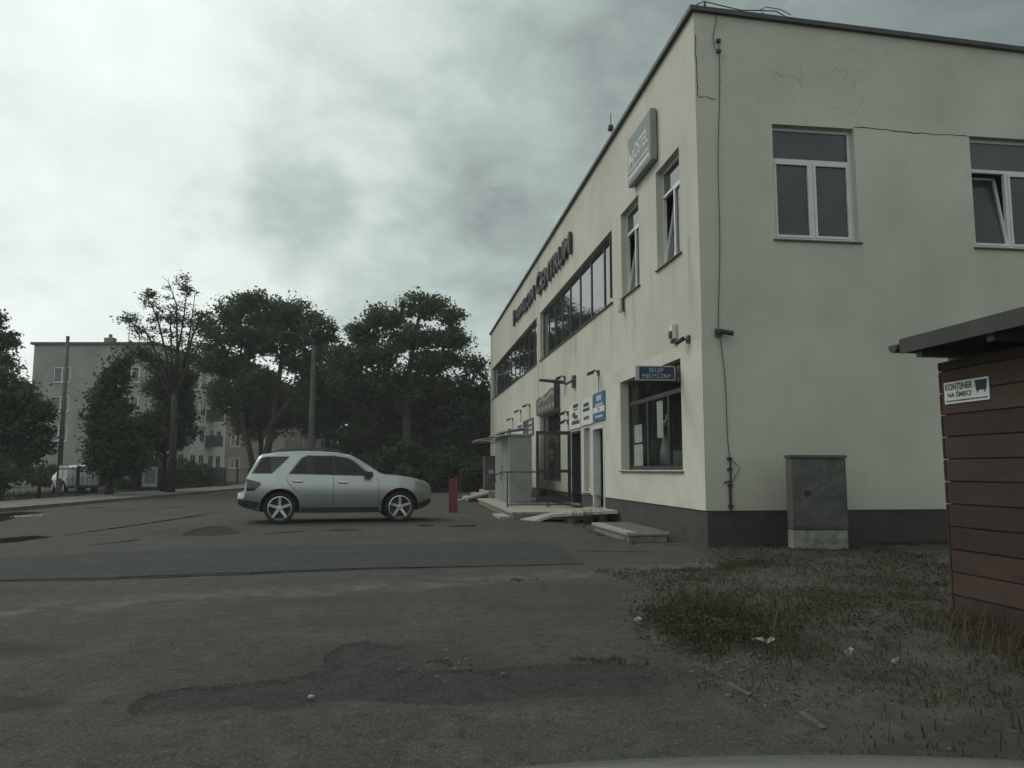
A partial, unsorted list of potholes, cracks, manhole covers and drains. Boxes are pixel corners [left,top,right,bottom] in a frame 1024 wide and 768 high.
crack [64,507,220,546]
